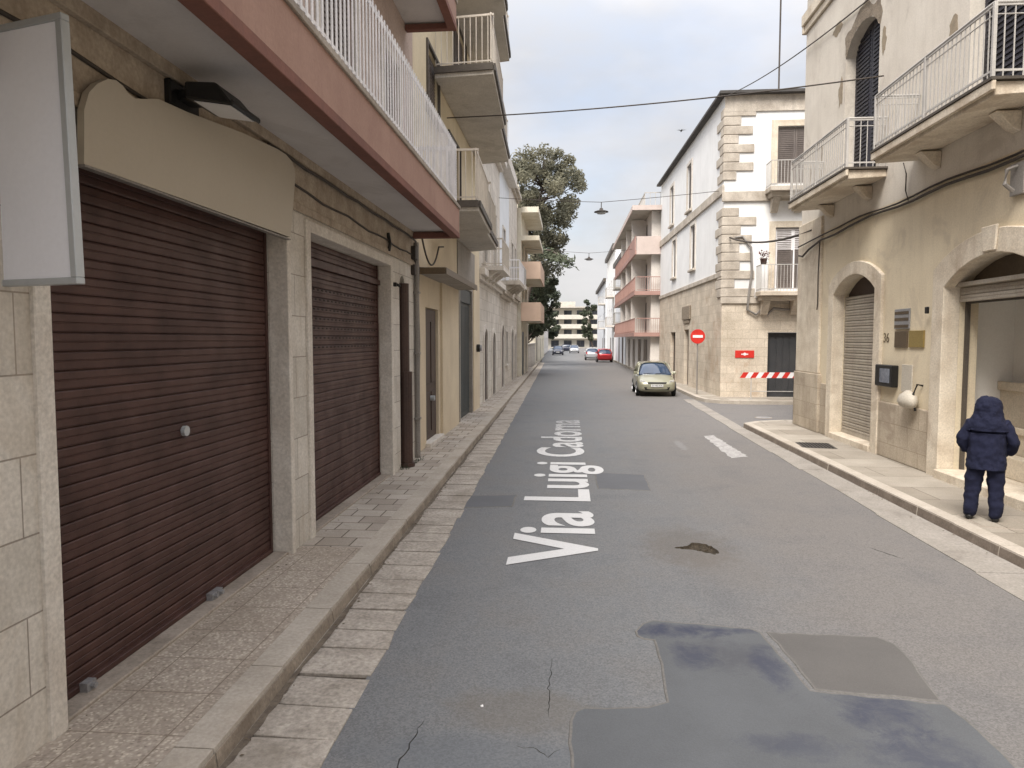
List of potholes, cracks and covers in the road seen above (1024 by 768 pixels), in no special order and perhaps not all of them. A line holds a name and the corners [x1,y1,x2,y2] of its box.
pothole [675,543,719,555]
crack [397,721,424,768]
